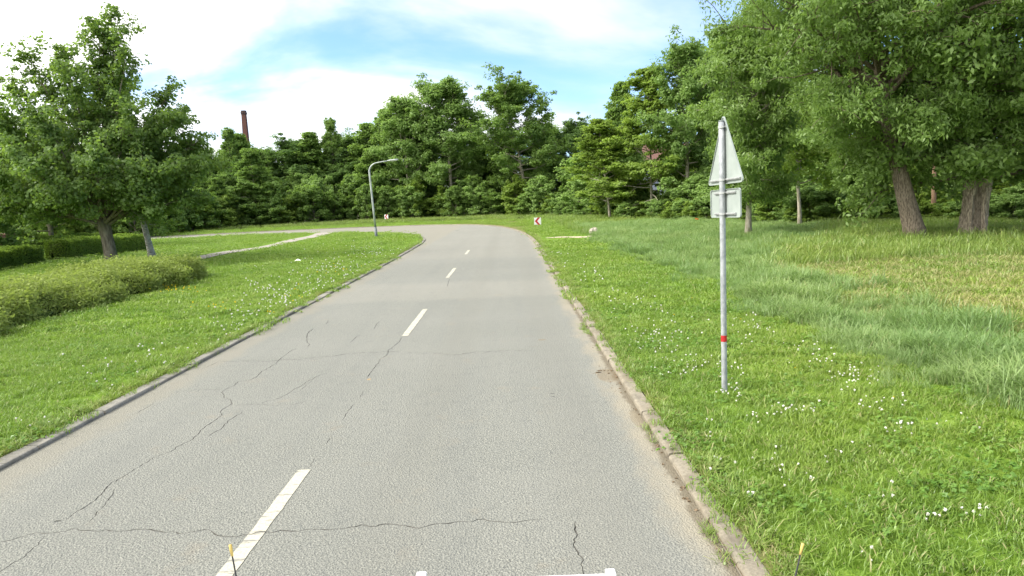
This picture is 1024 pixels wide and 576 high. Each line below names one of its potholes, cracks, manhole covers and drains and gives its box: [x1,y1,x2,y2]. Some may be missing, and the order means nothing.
crack [573,525,584,574]
crack [0,322,539,572]
